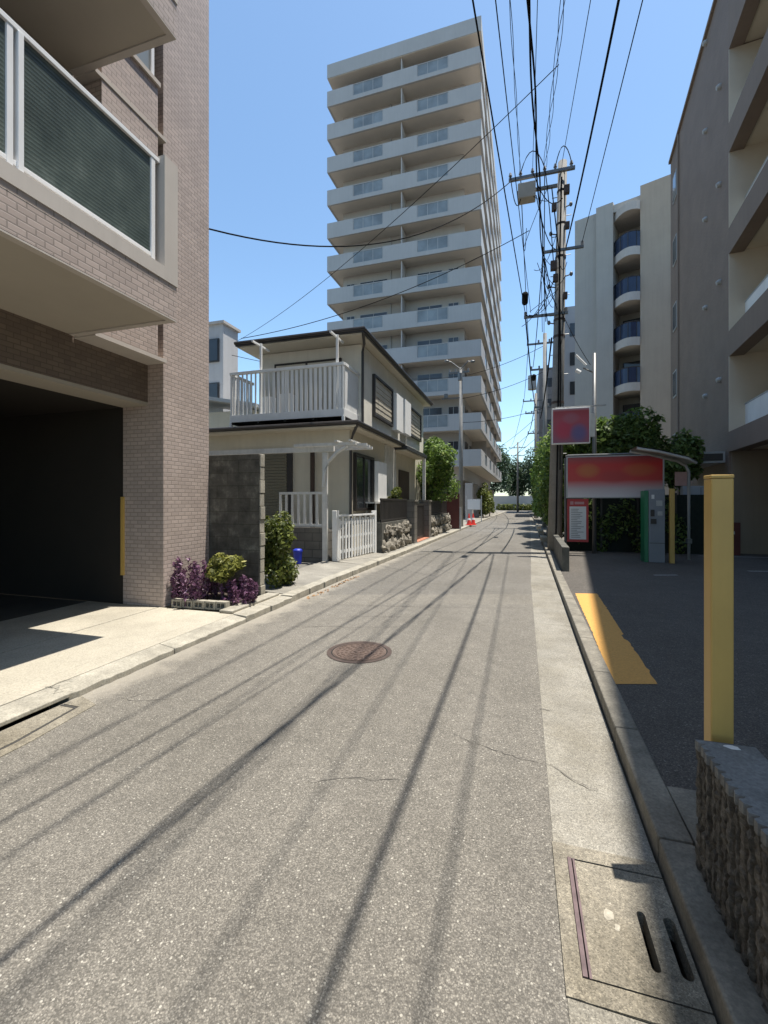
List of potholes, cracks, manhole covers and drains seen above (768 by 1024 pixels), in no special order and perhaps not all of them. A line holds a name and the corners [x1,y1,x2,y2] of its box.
manhole cover [327,641,392,663]
crack [456,734,598,790]
